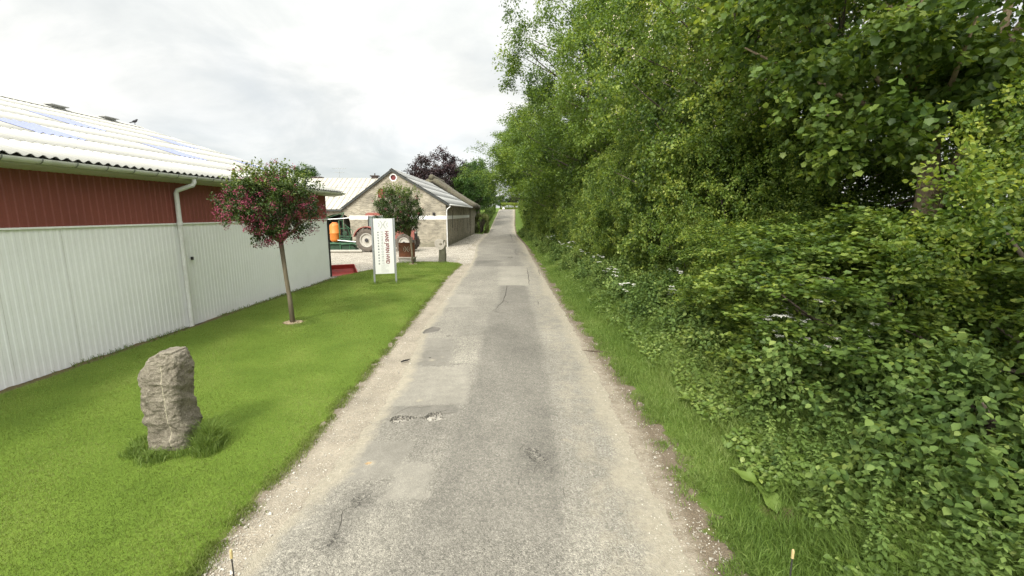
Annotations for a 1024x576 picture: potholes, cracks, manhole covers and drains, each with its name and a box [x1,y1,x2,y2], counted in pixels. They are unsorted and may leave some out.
pothole [524,448,548,464]
pothole [390,411,444,423]
